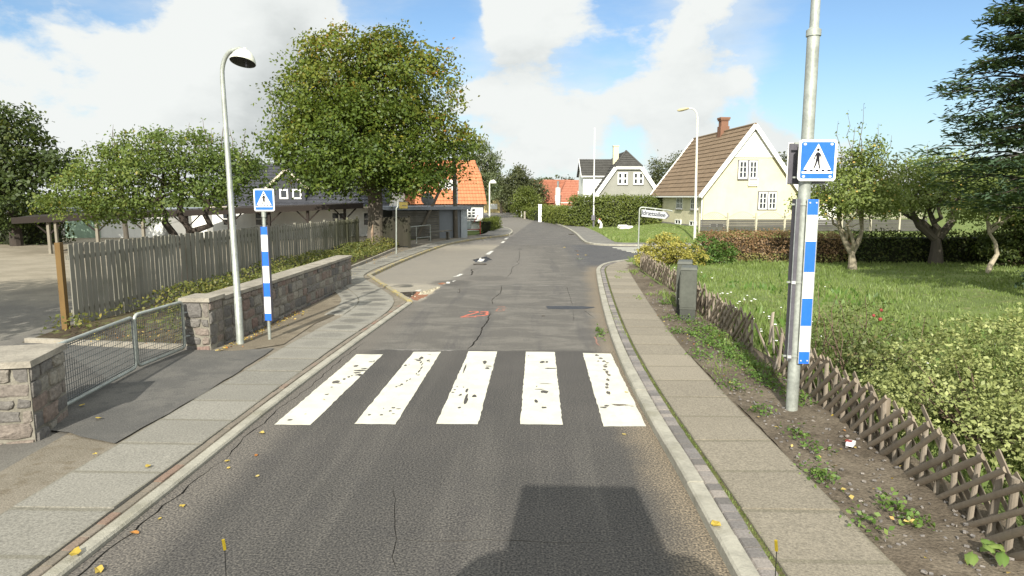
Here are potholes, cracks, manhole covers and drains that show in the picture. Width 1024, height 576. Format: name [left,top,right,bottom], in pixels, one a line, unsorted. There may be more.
crack [449,251,520,350]
